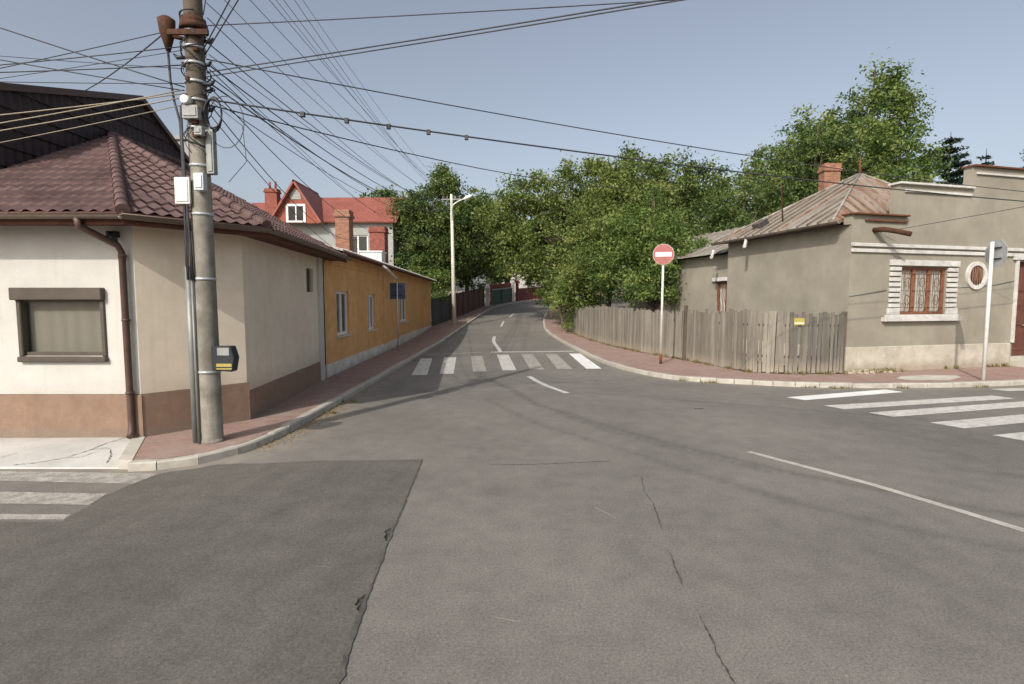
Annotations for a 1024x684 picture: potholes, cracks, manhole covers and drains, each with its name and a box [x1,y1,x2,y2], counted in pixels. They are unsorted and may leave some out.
crack [641,473,736,684]
